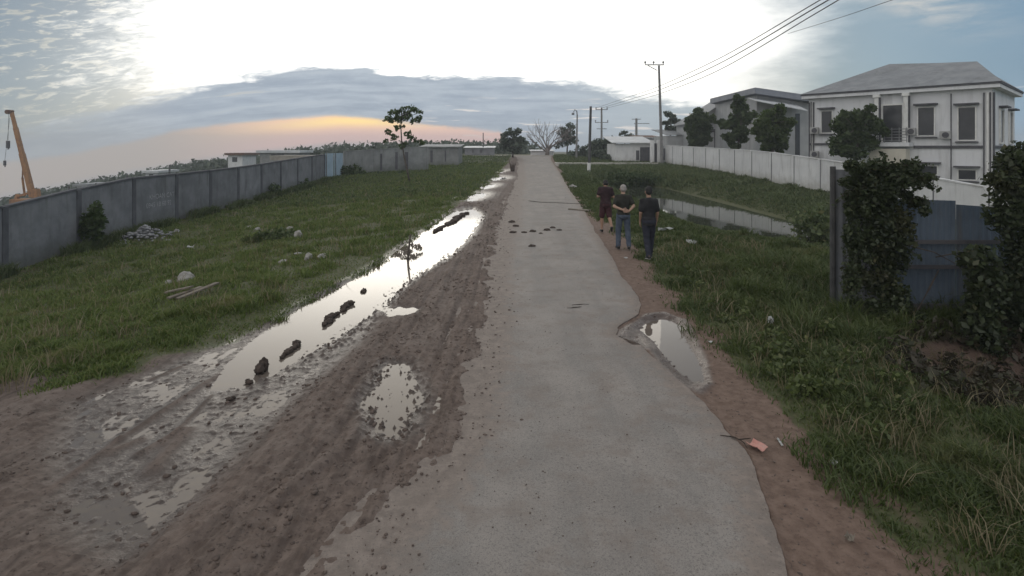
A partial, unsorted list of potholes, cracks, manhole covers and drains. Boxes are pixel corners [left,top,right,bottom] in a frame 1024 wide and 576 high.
pothole [616,311,718,397]
